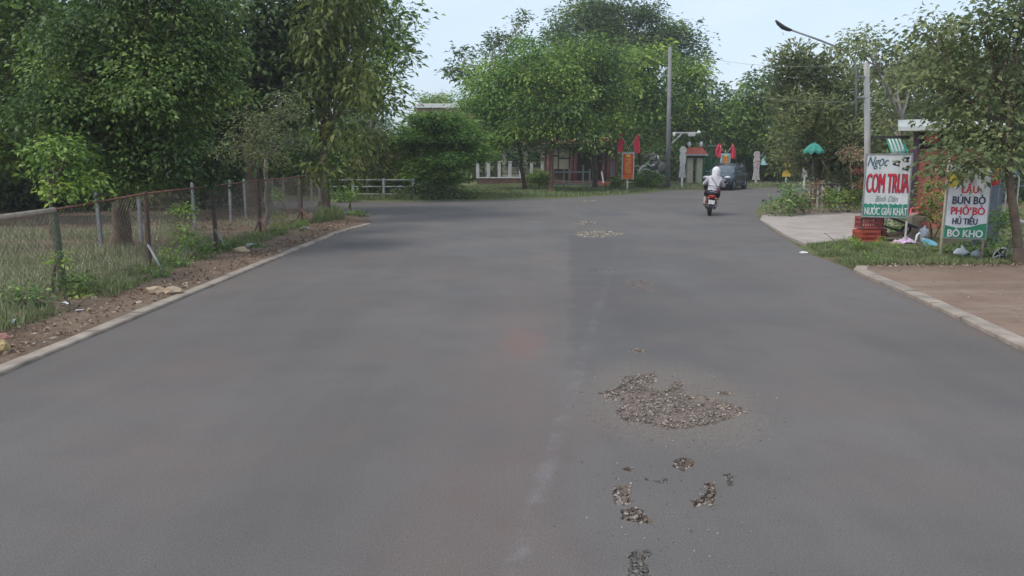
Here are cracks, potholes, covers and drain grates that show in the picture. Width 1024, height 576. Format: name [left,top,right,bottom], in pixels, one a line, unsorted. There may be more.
pothole [672,456,696,473]
pothole [620,507,654,524]
pothole [626,549,652,576]
pothole [572,230,625,238]
pothole [690,481,717,507]
pothole [598,372,752,430]
pothole [612,485,633,506]
